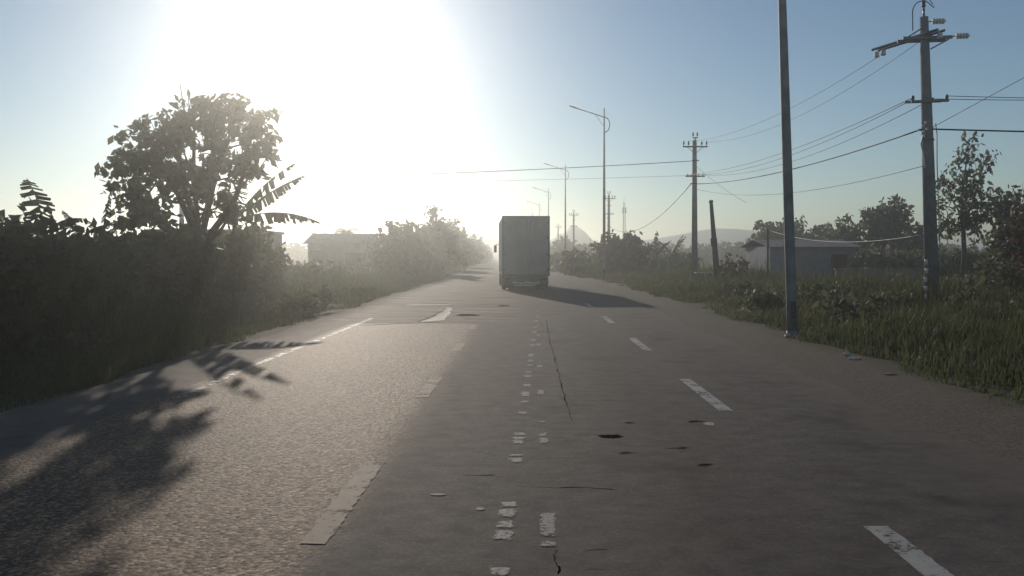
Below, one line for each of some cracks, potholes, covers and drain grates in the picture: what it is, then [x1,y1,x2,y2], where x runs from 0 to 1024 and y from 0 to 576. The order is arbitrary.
crack [546,320,573,422]
